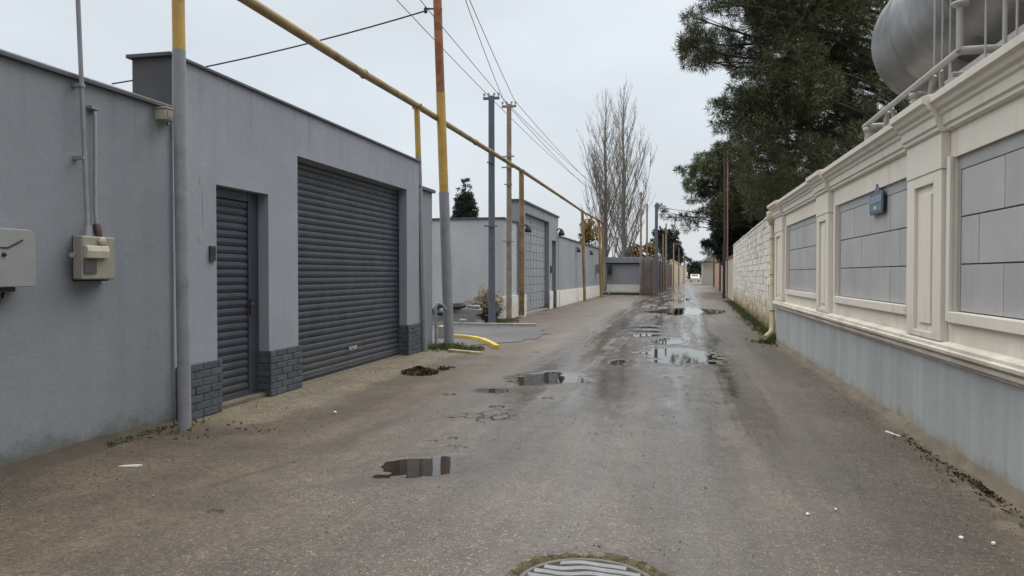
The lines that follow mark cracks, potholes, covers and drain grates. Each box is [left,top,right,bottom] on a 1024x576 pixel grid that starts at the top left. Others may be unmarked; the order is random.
crack [447,409,518,422]
manhole cover [505,552,669,576]
